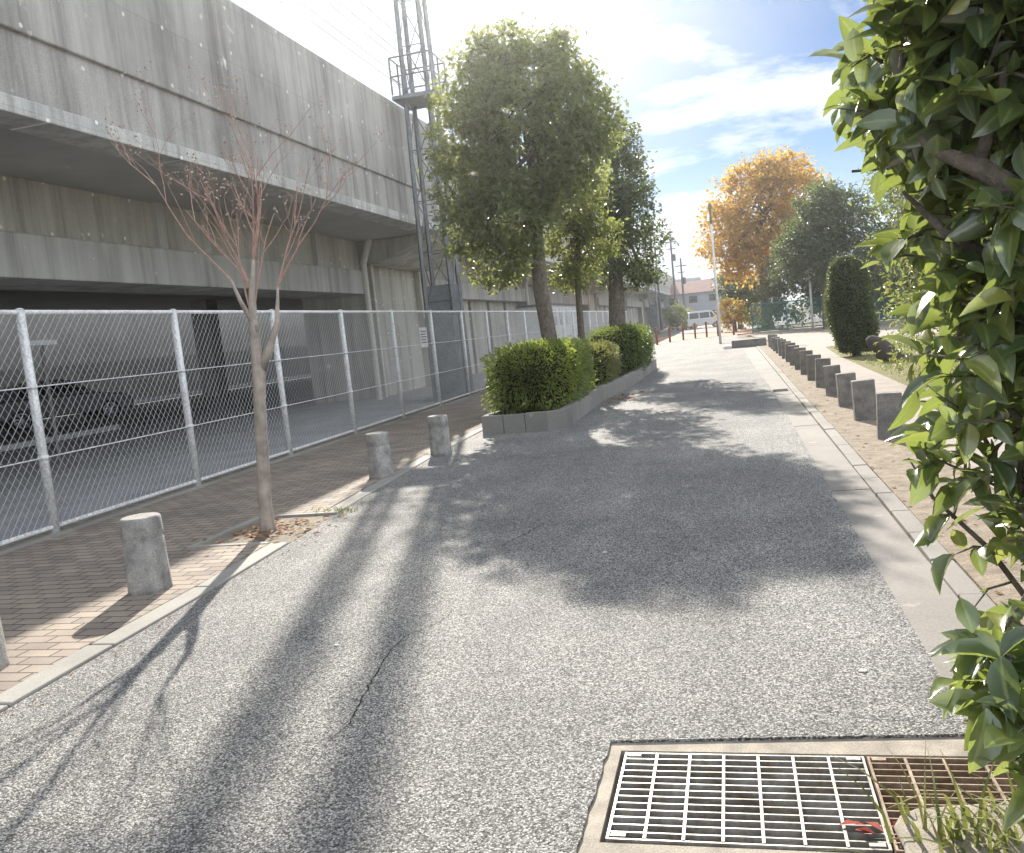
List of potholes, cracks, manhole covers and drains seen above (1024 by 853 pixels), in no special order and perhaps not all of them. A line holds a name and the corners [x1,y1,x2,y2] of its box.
drain grate [867,756,1018,853]
crack [295,611,451,766]
drain grate [606,752,893,853]
